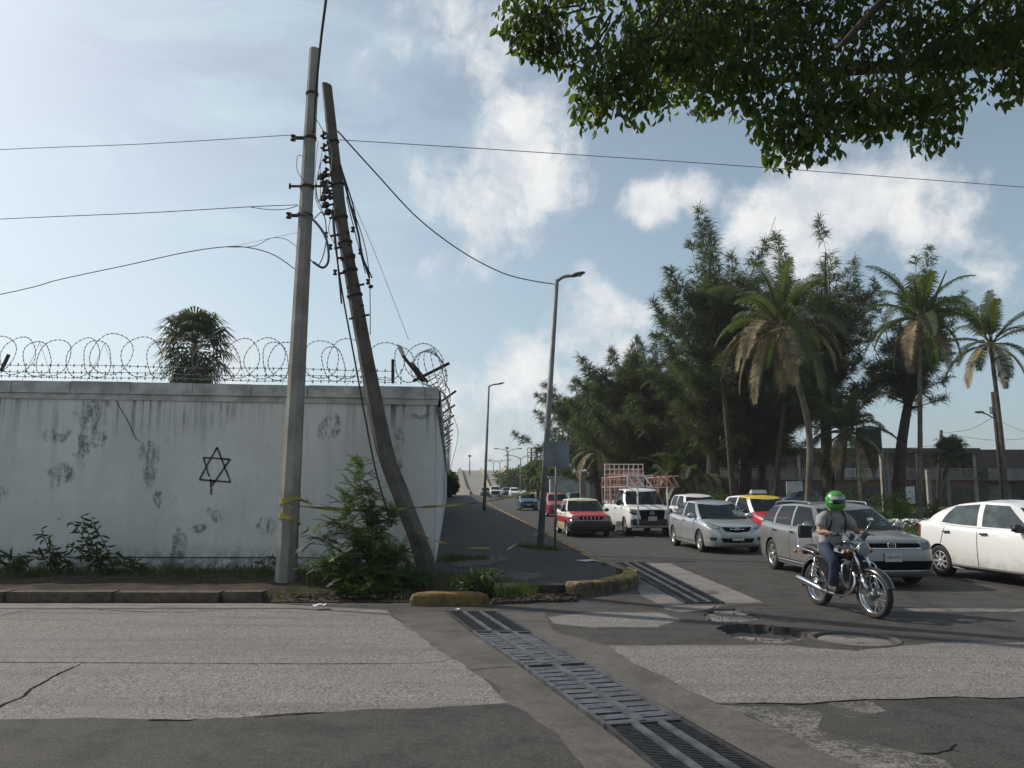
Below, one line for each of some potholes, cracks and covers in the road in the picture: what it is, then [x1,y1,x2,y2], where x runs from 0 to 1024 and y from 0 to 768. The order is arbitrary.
drain grate [523,662,682,729]
drain grate [472,630,586,668]
drain grate [654,585,725,604]
manhole cover [808,630,904,647]
drain grate [605,718,770,768]
drain grate [447,611,531,632]
crack [918,744,961,754]
crack [0,663,82,707]
drain grate [615,562,663,572]
pothole [716,623,808,643]
drain grate [638,572,689,585]
